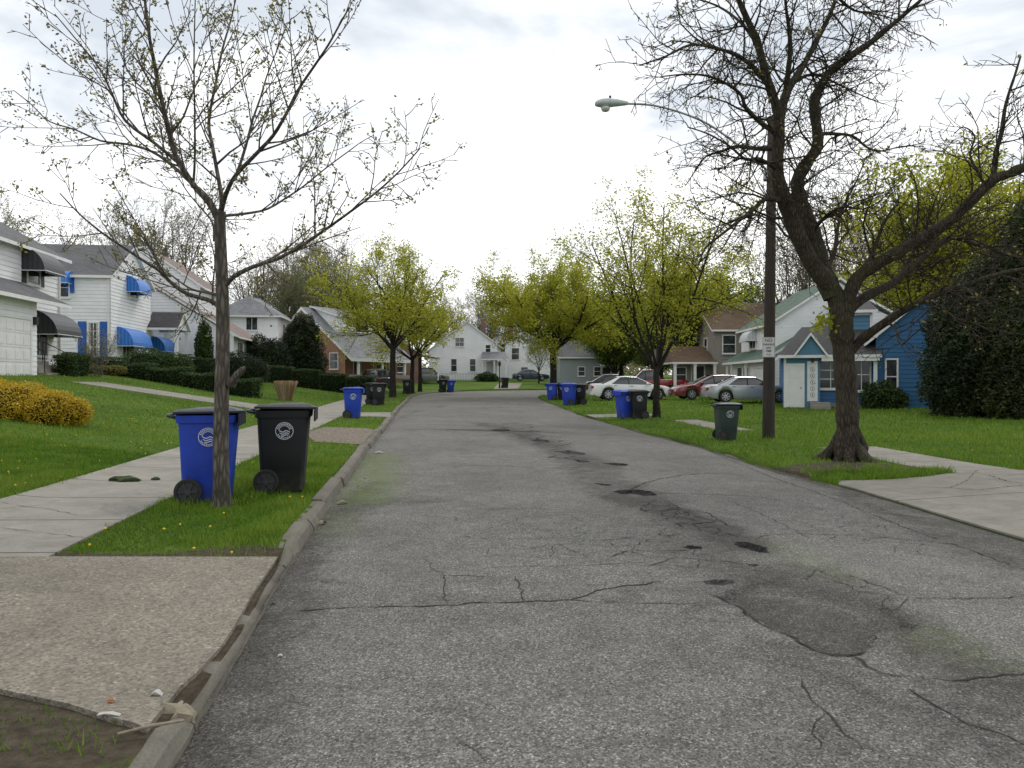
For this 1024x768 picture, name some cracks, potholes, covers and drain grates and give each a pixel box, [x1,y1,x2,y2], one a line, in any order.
pothole [734,541,770,553]
crack [710,594,1024,744]
crack [306,452,1023,629]
